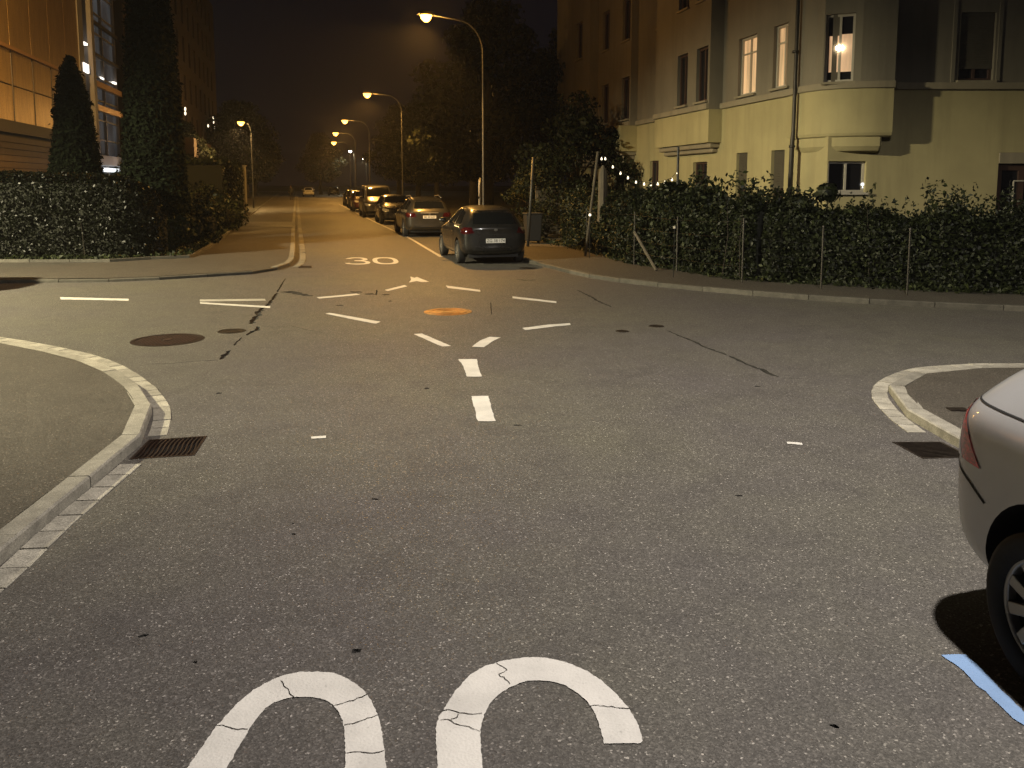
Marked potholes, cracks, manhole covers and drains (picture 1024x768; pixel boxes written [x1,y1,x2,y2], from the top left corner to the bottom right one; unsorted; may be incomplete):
crack [441,709,481,731]
crack [333,693,380,725]
manhole cover [424,308,472,316]
drain grate [129,436,207,460]
crack [163,279,318,364]
crack [667,330,800,379]
manhole cover [130,333,204,347]
